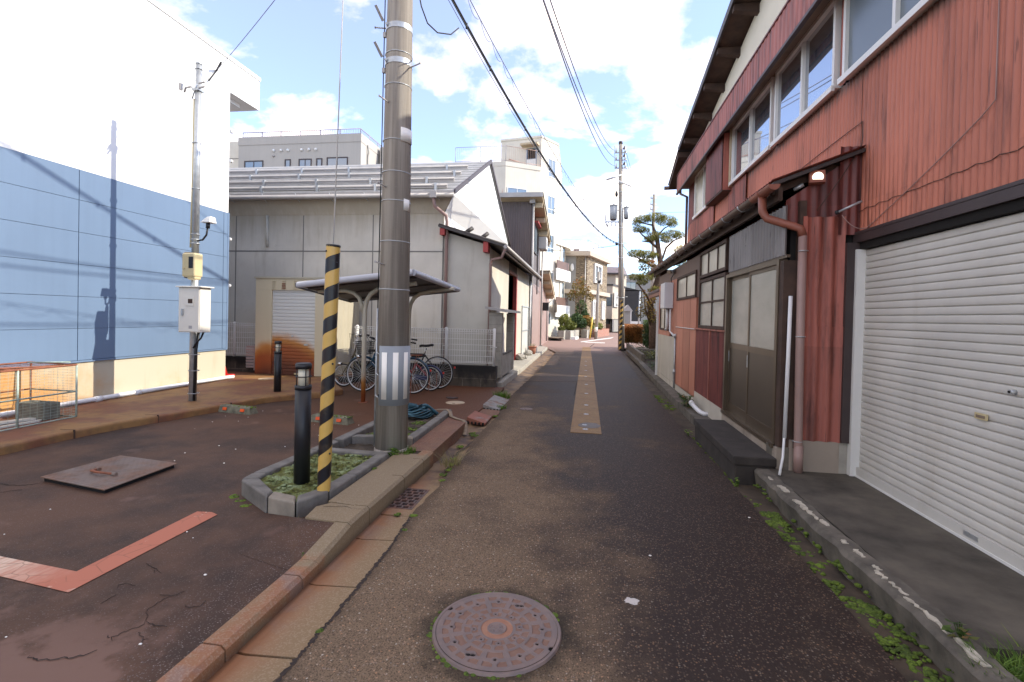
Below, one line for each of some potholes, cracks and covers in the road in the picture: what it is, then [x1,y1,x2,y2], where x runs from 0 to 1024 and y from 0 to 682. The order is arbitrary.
manhole cover [432,592,562,678]
crack [27,591,206,661]
drain grate [387,488,429,510]
